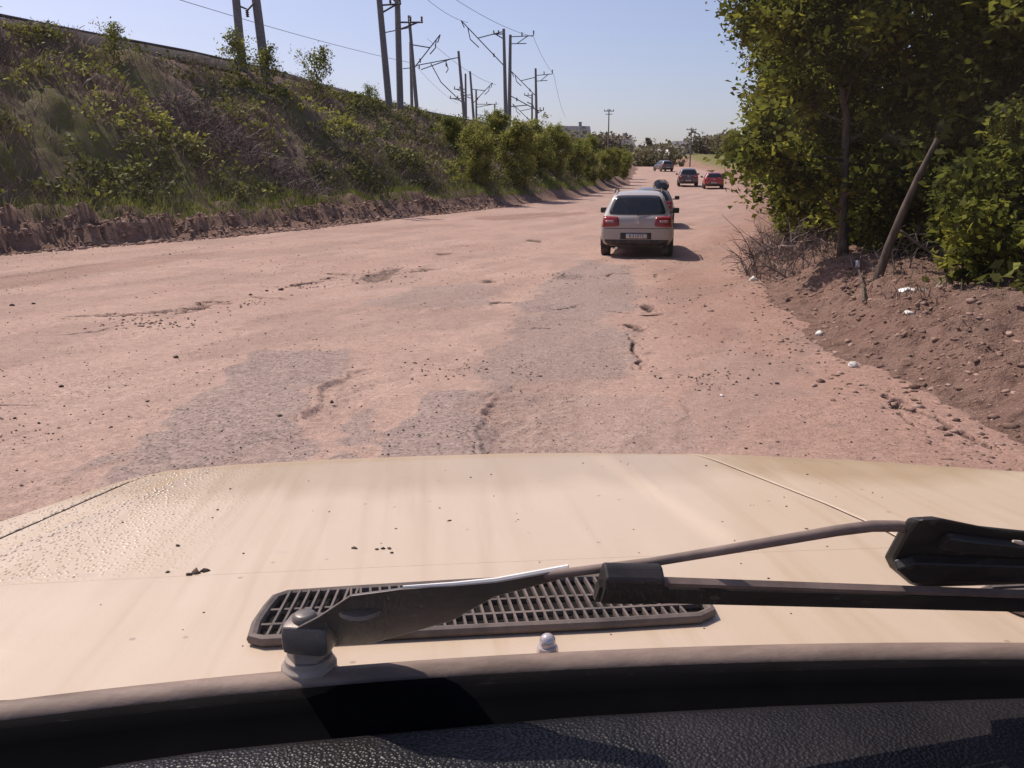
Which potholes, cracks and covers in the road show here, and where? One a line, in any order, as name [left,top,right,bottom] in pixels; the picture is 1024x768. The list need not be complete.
crack [621,332,654,371]
pothole [634,302,670,318]
pothole [354,267,411,284]
